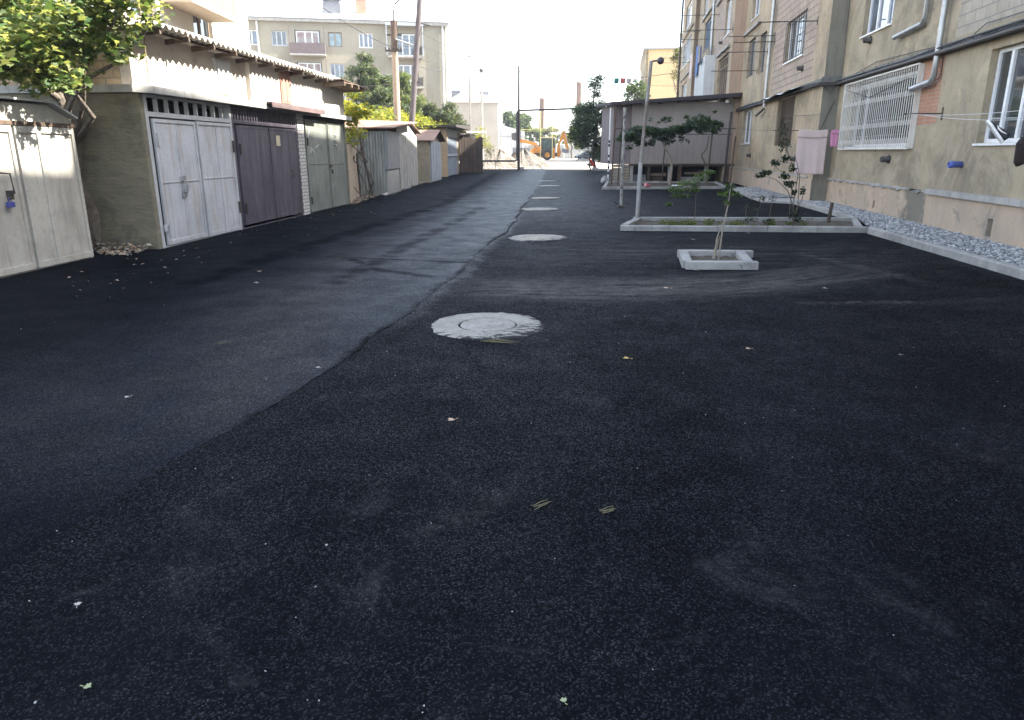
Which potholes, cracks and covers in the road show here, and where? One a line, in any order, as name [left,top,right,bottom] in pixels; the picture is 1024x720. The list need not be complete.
manhole cover [509,234,569,242]
manhole cover [431,312,545,340]
